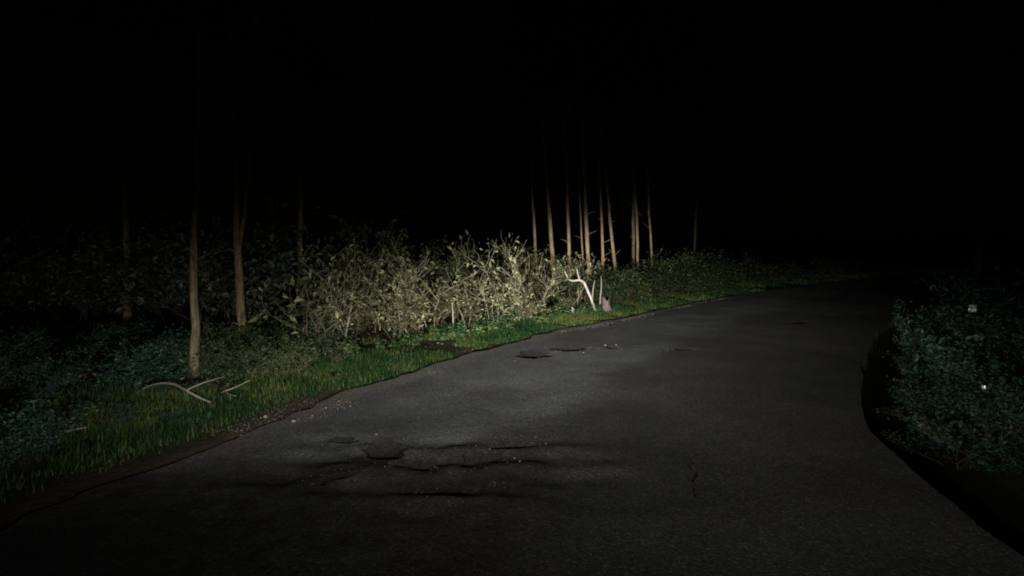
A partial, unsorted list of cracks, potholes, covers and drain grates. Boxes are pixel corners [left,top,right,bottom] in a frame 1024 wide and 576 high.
pothole [514,350,552,359]
crack [687,457,699,496]
pothole [359,441,412,460]
